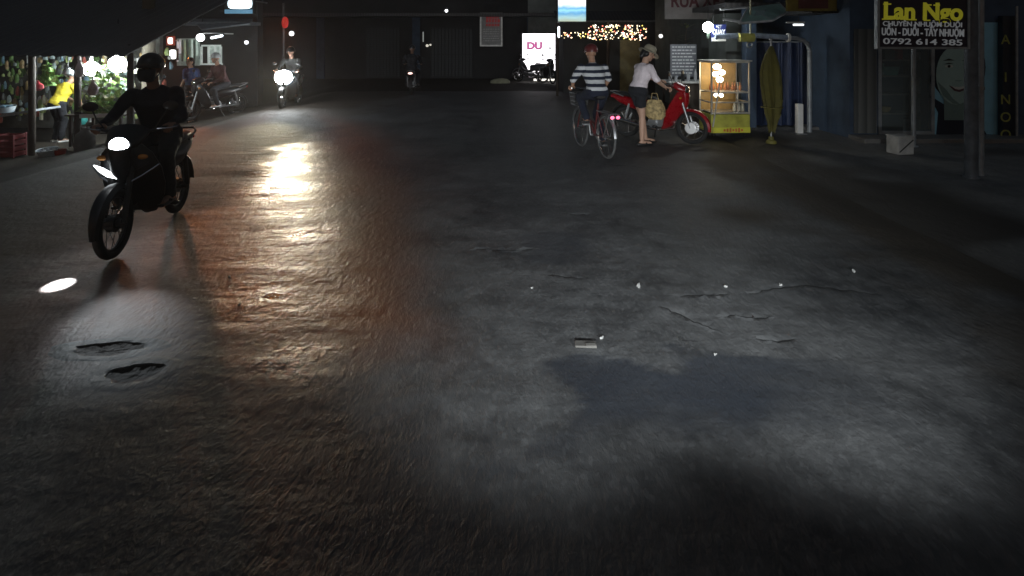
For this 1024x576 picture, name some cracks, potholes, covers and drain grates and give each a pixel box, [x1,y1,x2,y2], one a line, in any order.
pothole [47,337,171,361]
crack [658,280,875,346]
pothole [85,356,184,392]
